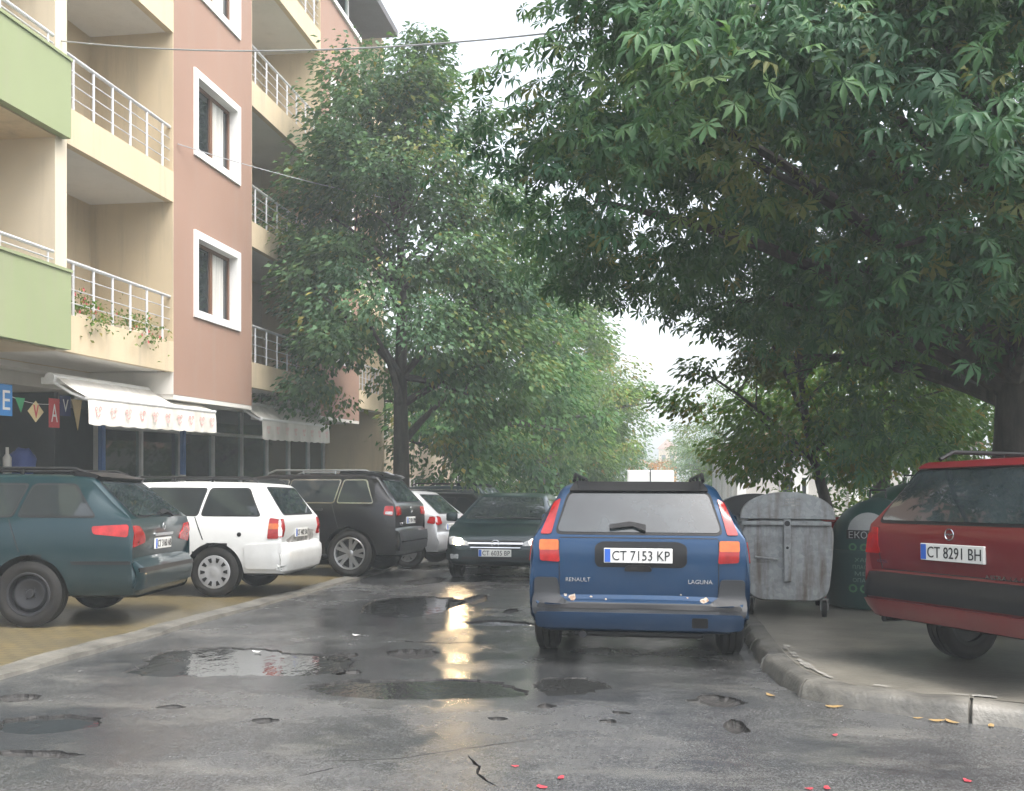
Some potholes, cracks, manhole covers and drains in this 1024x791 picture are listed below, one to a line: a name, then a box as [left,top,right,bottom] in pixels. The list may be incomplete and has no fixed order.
pothole [459,594,488,604]
pothole [303,678,529,700]
pothole [0,694,42,702]
pothole [0,750,85,759]
pothole [361,596,467,618]
pothole [532,677,612,696]
pothole [123,647,364,677]
pothole [723,719,751,734]
pothole [385,649,440,660]
pothole [686,694,747,707]
pothole [0,714,102,735]
crack [296,738,543,788]
